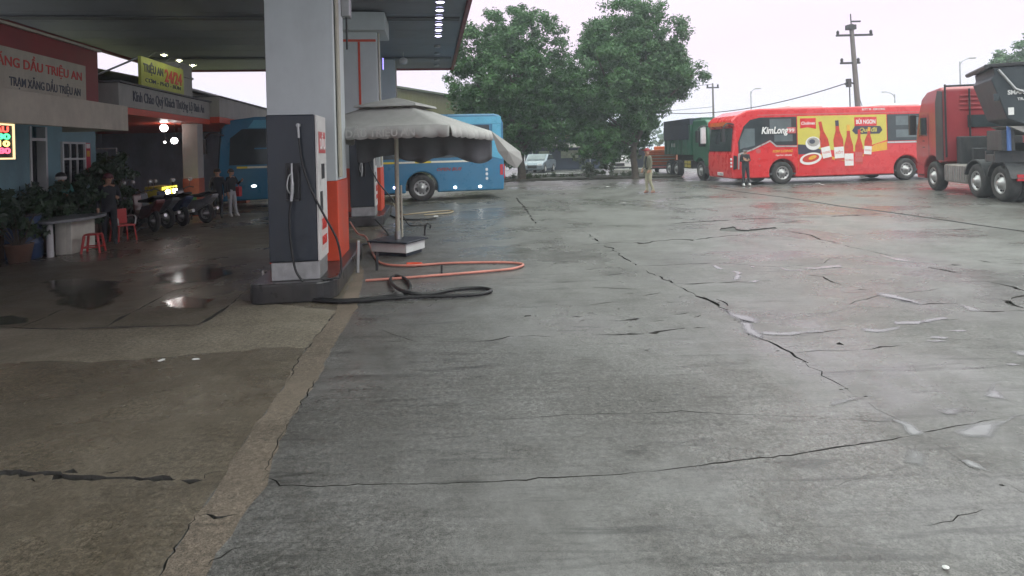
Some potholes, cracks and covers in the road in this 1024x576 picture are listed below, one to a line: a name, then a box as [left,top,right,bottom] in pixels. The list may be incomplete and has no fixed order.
crack [160,514,237,575]
crack [921,509,983,526]
crack [0,464,220,485]
crack [358,198,1024,493]
